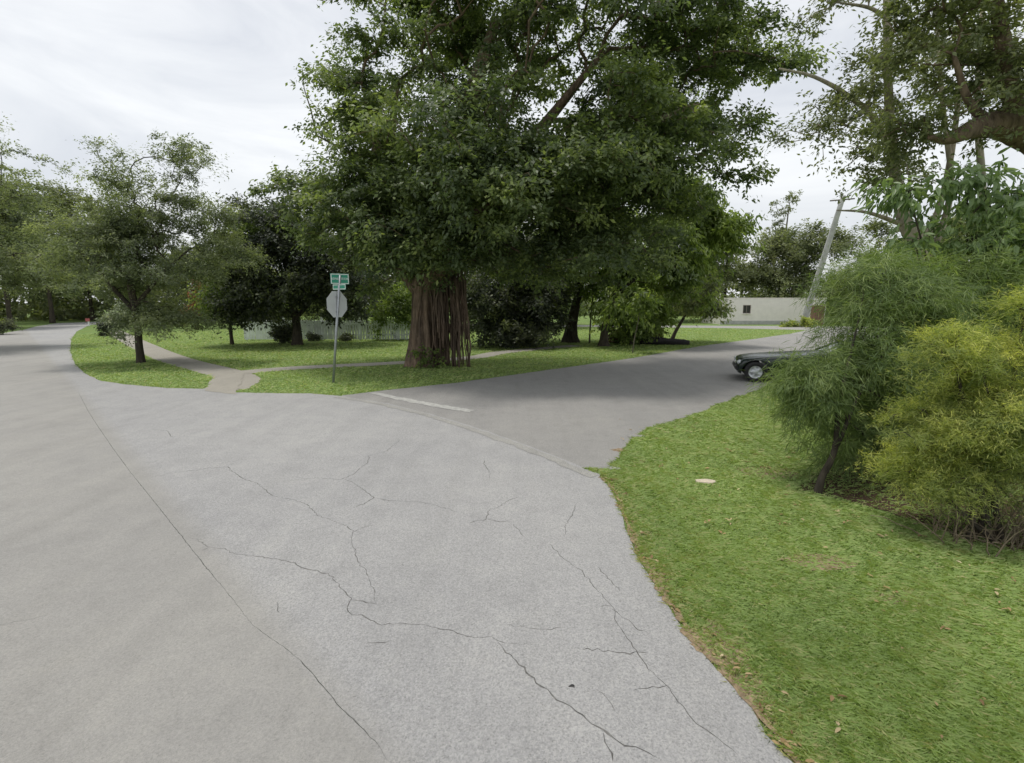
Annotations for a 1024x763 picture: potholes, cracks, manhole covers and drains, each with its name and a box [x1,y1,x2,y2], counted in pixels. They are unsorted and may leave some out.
crack [81,398,387,760]
crack [298,441,462,513]
crack [172,467,738,760]
